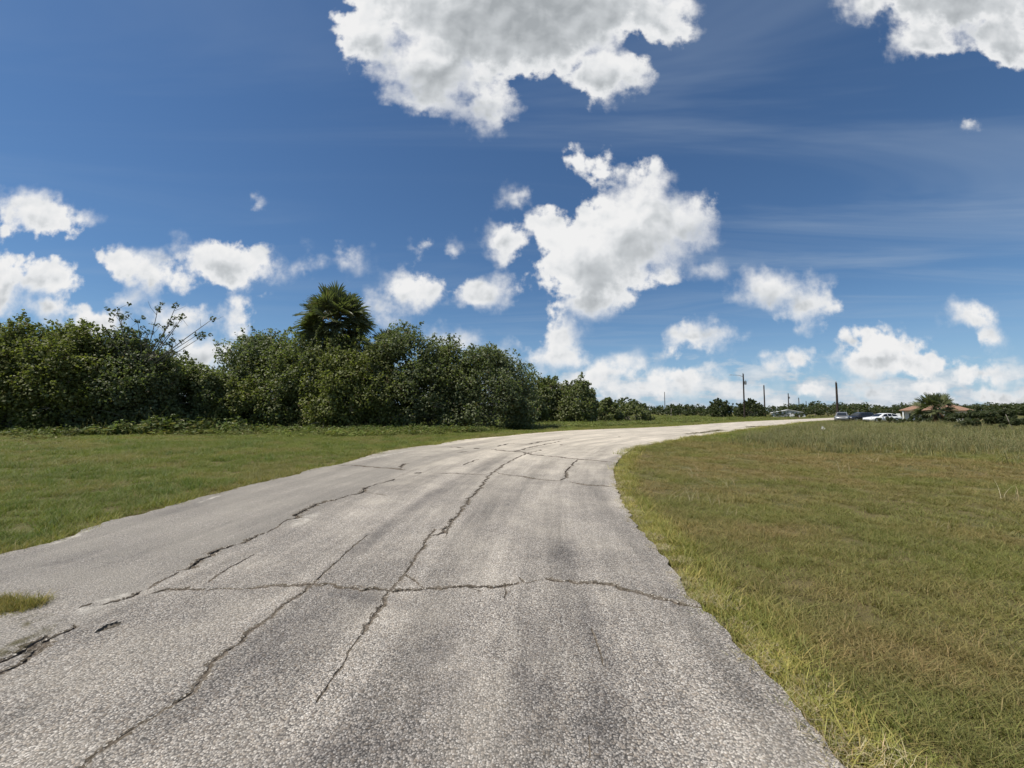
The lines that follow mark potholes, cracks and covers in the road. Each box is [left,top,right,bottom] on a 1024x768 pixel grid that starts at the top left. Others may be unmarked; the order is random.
crack [0,439,700,768]
